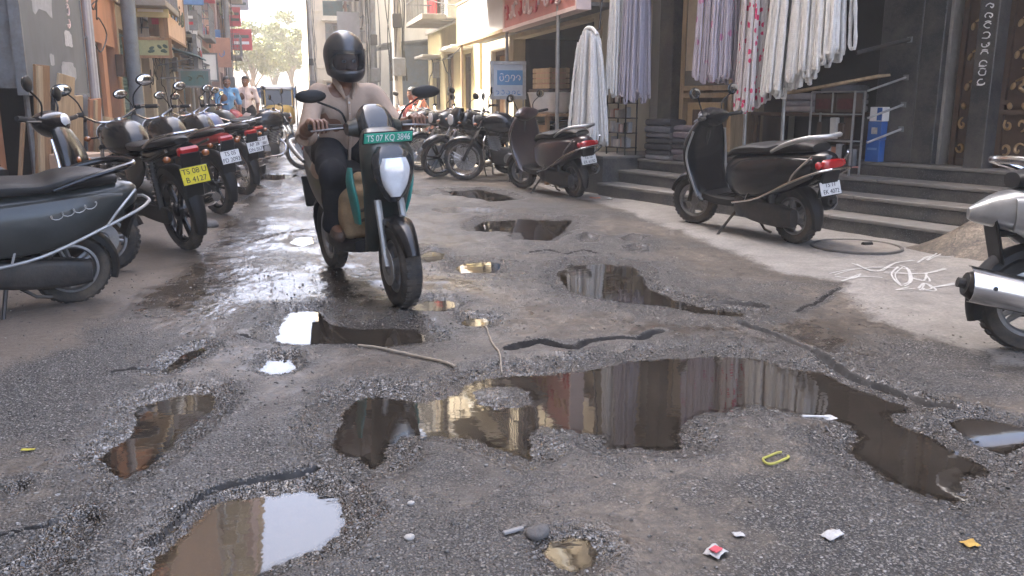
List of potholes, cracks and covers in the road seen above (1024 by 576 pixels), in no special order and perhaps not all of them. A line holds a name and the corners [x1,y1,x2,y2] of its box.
pothole [469,216,575,241]
pothole [551,260,753,317]
pothole [137,479,364,576]
pothole [89,387,231,481]
pothole [450,258,508,274]
crack [503,329,666,350]
manhole cover [810,238,904,255]
crack [2,517,59,536]
pothole [537,532,607,574]
pothole [265,304,441,348]
pothole [256,355,300,375]
pothole [411,296,462,312]
